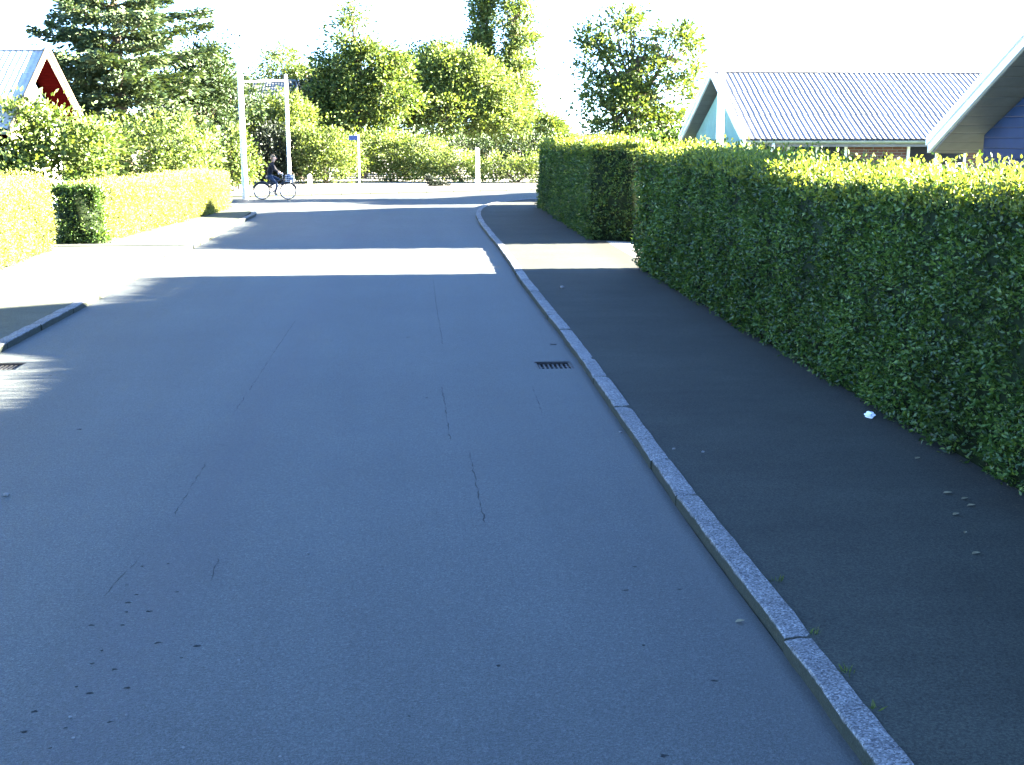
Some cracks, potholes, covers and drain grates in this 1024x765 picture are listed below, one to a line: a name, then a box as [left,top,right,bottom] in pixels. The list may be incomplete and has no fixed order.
crack [471,461,485,522]
